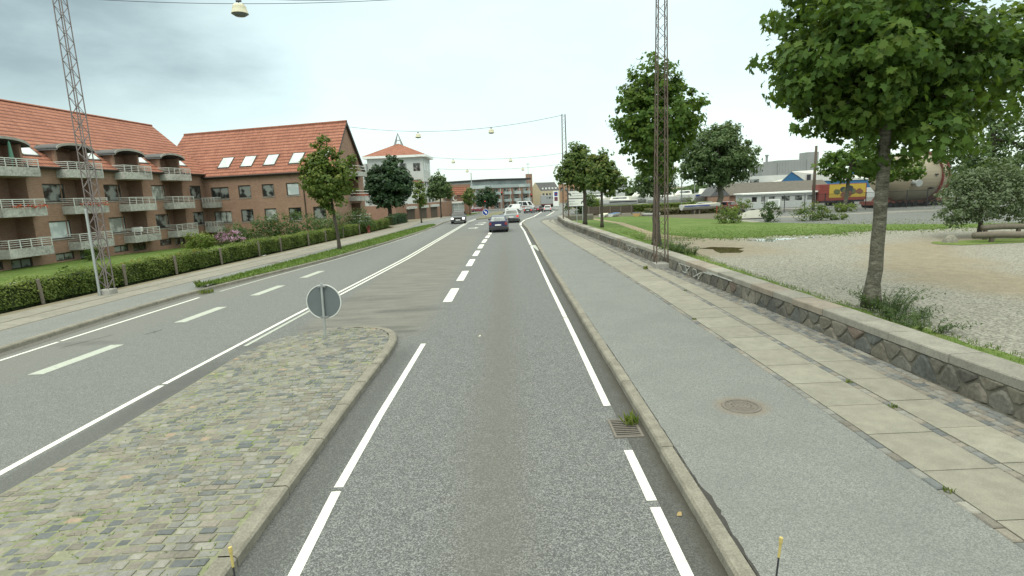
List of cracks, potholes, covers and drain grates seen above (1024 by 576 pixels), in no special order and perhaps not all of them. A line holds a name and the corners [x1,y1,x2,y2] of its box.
manhole cover [721,399,762,414]
drain grate [607,419,645,438]
